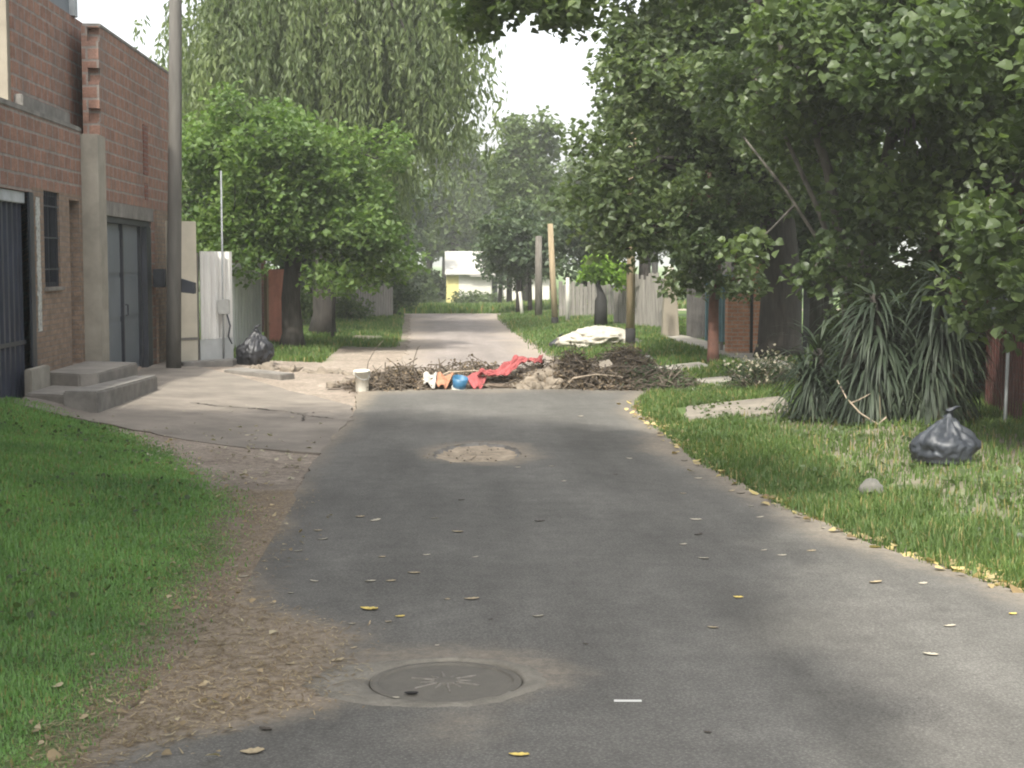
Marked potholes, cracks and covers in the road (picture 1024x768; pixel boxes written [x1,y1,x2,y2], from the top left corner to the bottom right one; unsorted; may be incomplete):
manhole cover [302,656,547,707]
crack [190,402,333,421]
